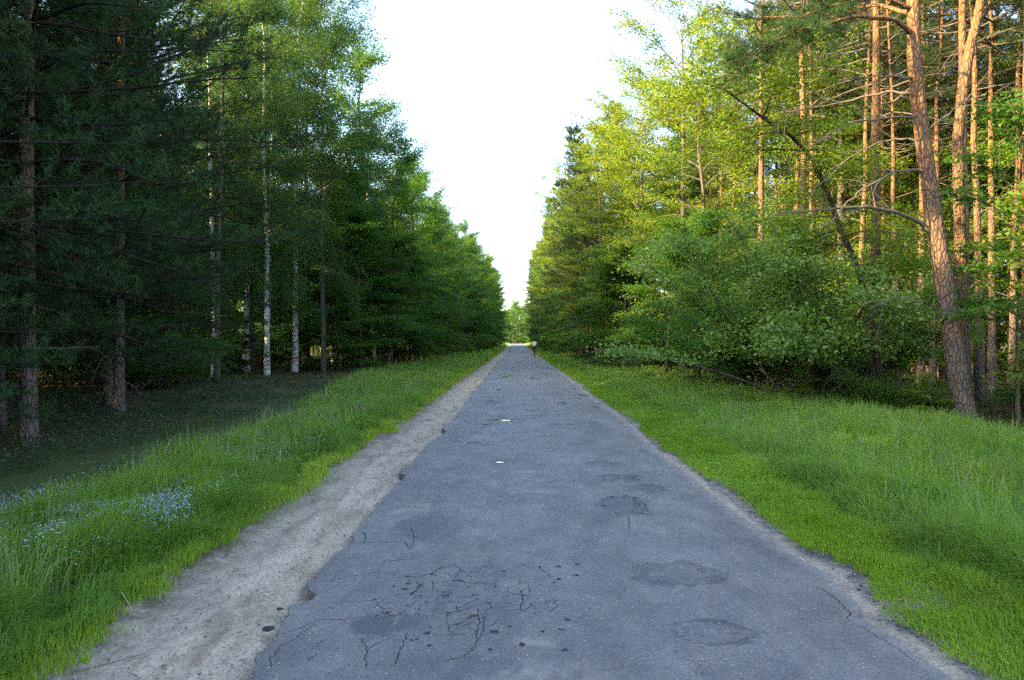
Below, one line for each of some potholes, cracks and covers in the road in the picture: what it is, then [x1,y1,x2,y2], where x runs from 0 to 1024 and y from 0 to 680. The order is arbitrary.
crack [815,585,919,664]
crack [269,528,558,668]
